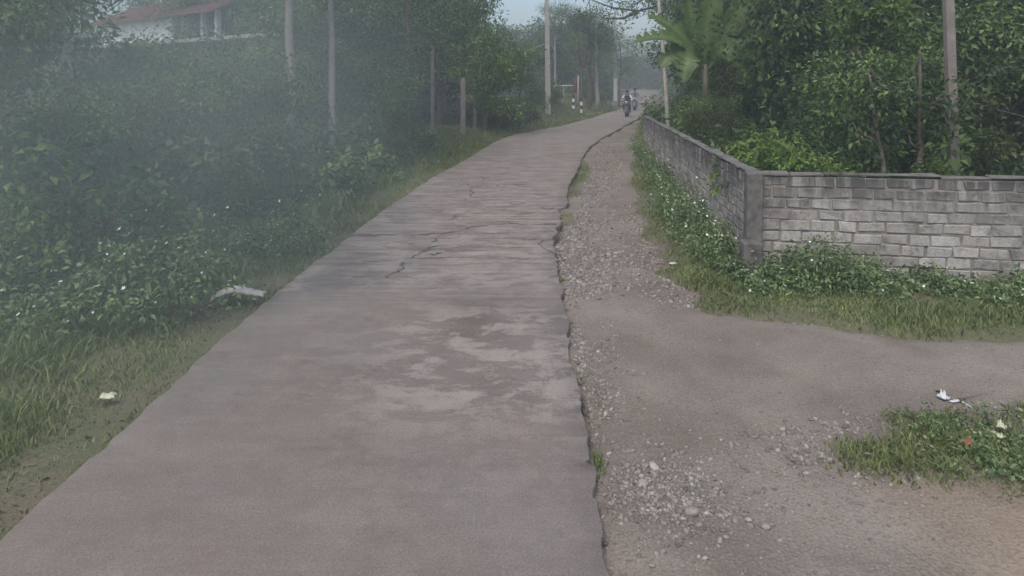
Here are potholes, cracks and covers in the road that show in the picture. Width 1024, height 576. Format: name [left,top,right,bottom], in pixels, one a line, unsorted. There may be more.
crack [345,177,556,280]
